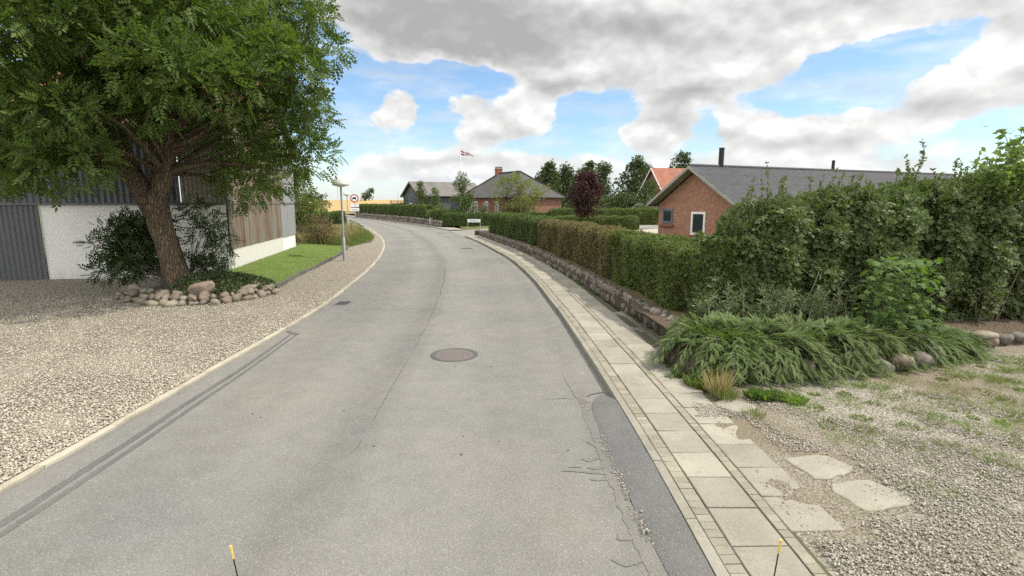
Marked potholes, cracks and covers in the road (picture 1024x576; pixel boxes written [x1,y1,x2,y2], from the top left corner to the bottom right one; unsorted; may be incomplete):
manhole cover [430,348,478,362]
crack [559,378,664,576]
crack [357,267,445,447]
